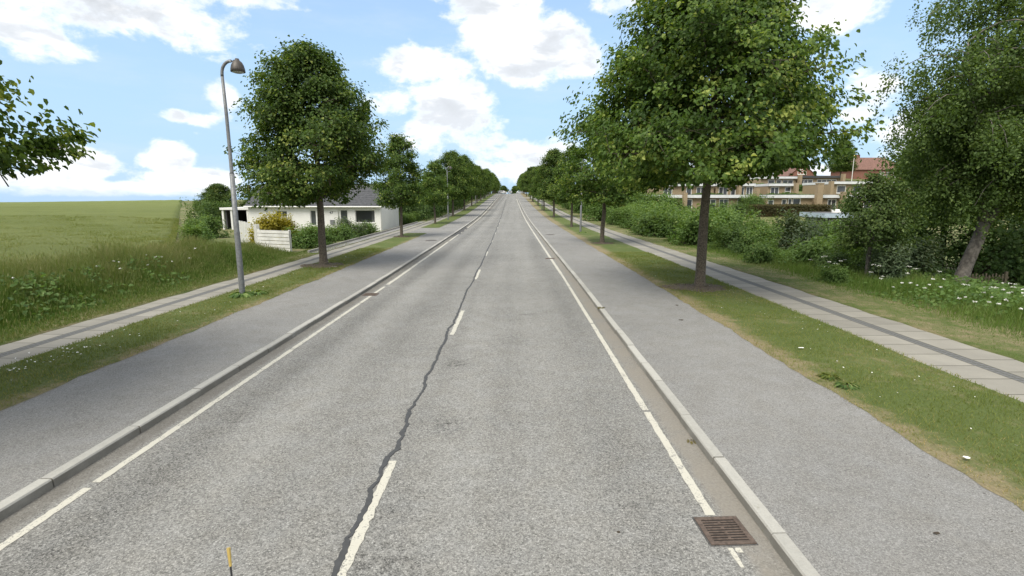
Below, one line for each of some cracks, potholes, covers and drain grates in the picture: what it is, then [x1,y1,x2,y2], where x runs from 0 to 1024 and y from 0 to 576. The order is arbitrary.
drain grate [692,516,758,547]
